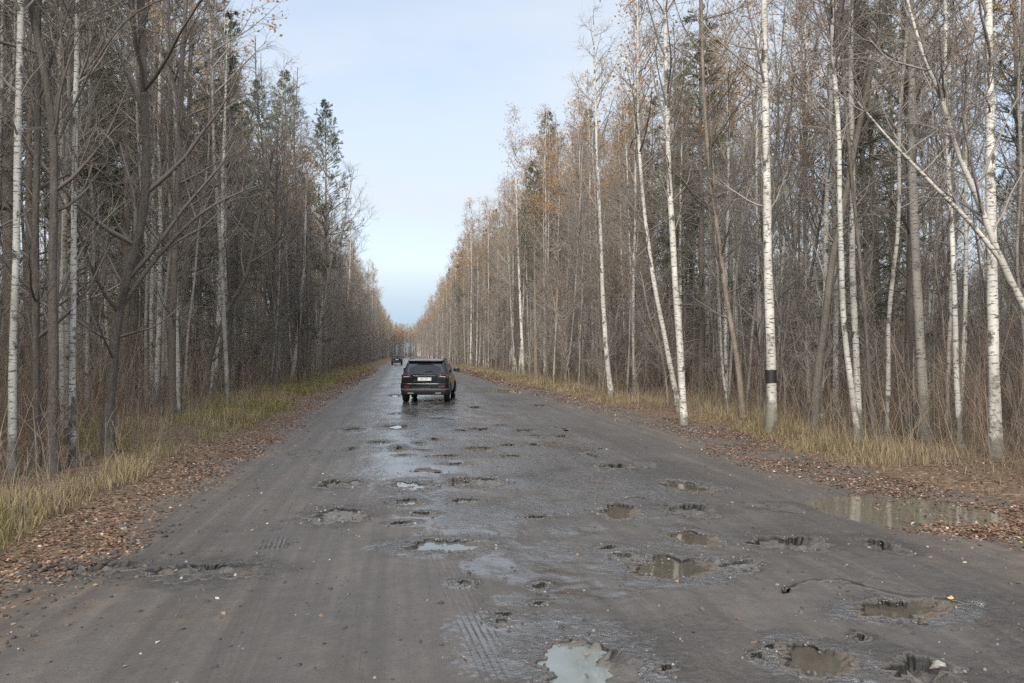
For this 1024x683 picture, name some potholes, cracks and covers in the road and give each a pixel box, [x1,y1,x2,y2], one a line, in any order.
pothole [528,581,551,591]
pothole [137,561,269,585]
pothole [853,537,915,557]
pothole [399,537,500,554]
pothole [655,480,719,494]
pothole [529,635,646,683]
pothole [461,477,504,488]
pothole [746,651,769,661]
pothole [625,552,732,581]
pothole [663,529,725,547]
pothole [845,597,960,622]
pothole [451,578,476,586]
